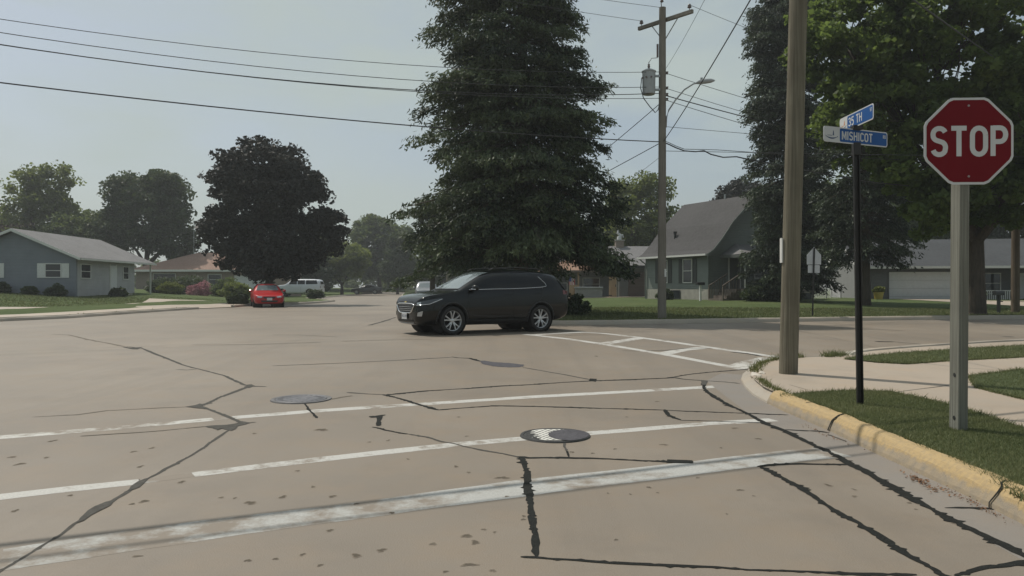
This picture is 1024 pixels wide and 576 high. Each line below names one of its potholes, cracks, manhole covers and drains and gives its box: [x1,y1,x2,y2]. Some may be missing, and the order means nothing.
crack [369,394,540,556]
crack [54,334,254,423]
crack [0,489,133,572]
manhole cover [270,394,332,404]
manhole cover [520,428,591,443]
crack [760,467,950,576]
